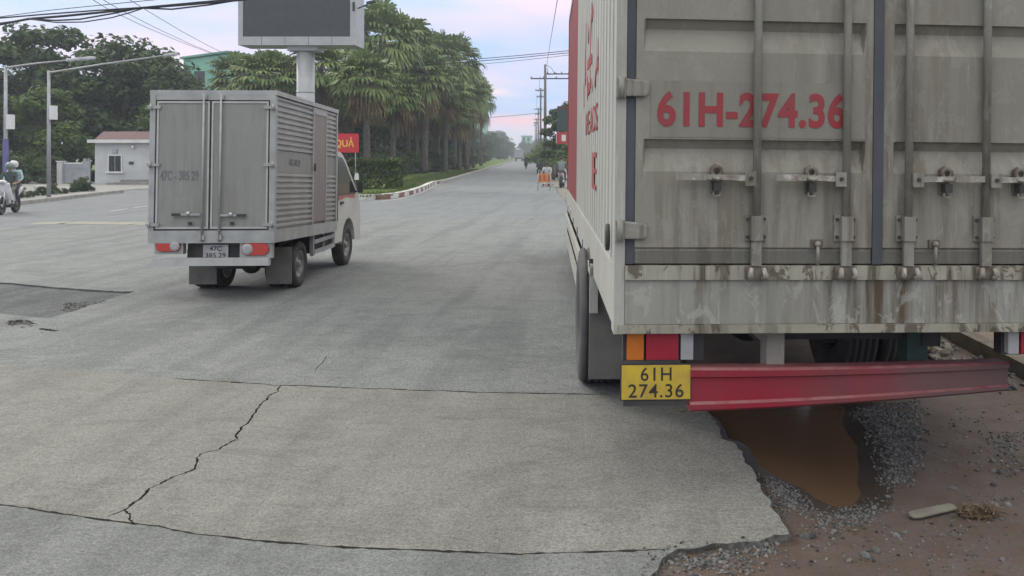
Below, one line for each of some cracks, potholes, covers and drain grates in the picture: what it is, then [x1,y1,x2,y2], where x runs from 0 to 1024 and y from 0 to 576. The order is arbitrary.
pothole [706,402,896,515]
crack [104,386,281,525]
